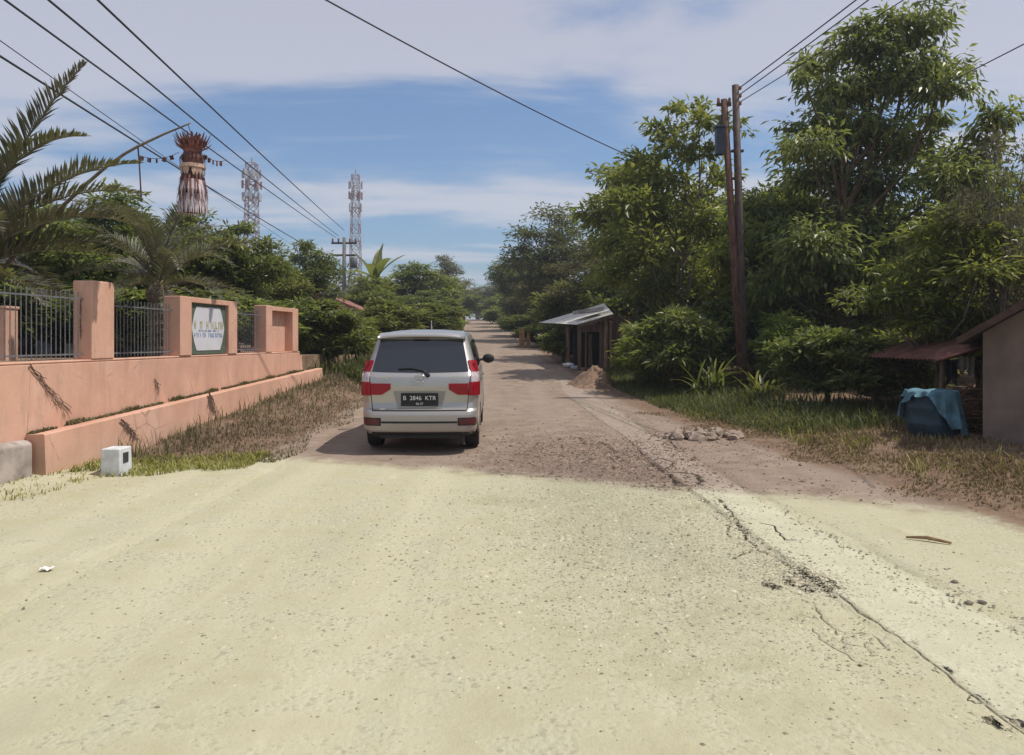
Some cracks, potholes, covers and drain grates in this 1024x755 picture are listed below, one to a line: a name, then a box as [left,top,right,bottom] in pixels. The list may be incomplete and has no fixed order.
crack [798,604,889,666]
pothole [778,566,827,595]
